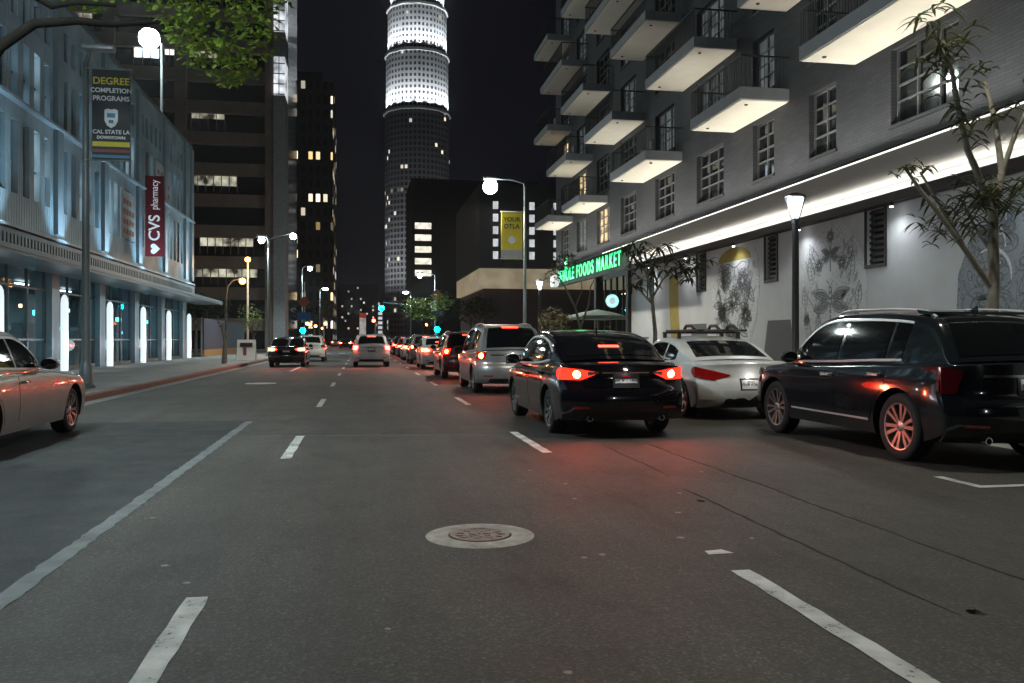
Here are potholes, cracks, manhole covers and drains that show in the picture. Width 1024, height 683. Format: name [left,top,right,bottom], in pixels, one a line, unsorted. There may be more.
manhole cover [426,524,534,549]
